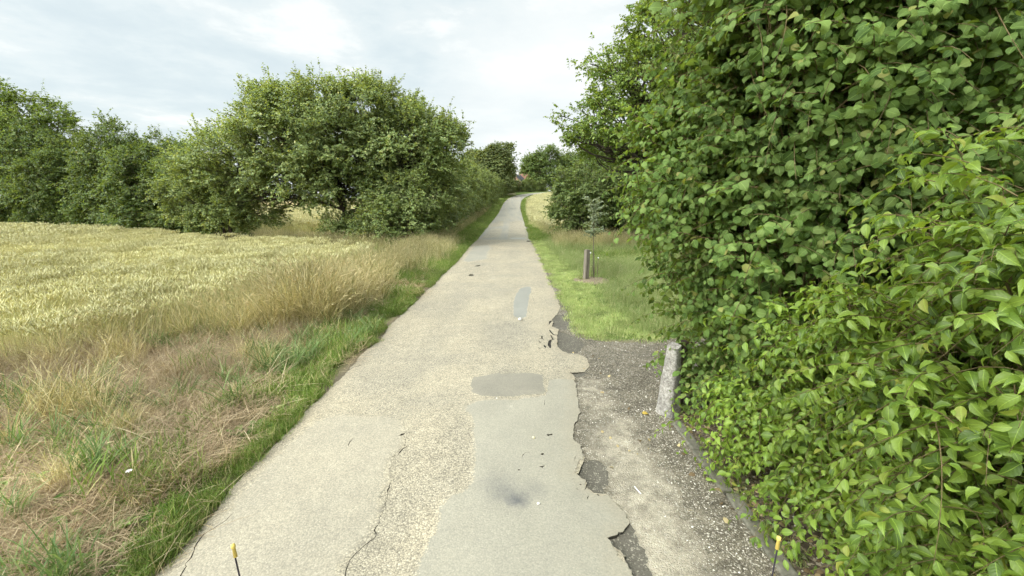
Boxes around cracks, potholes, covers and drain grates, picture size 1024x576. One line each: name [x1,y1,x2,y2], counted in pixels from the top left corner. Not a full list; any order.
pothole [609,524,653,576]
pothole [578,460,609,494]
pothole [552,315,573,330]
crack [345,442,406,576]
pothole [557,332,584,354]
